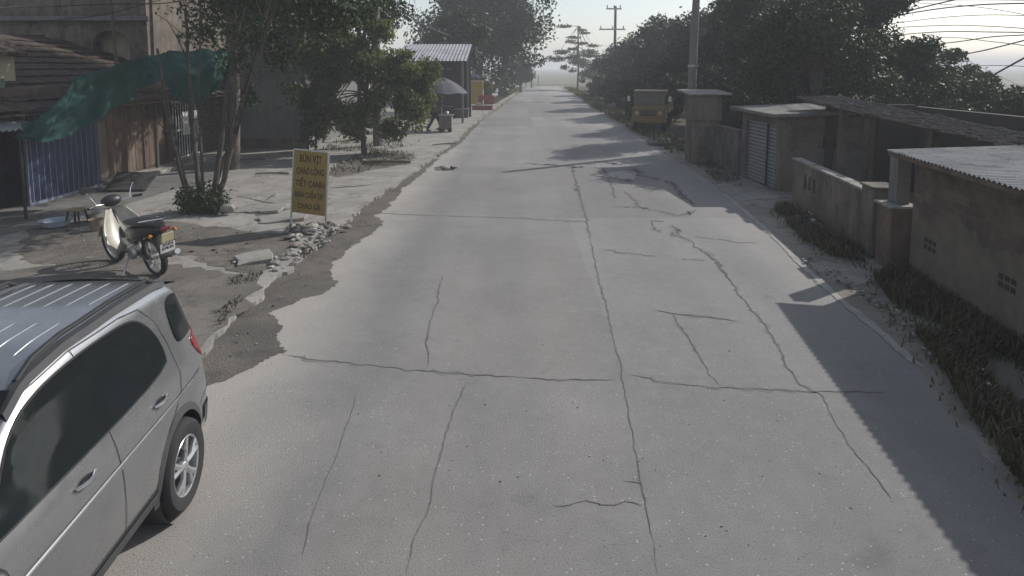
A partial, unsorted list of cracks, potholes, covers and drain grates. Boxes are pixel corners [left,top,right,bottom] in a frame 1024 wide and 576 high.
crack [285,277,613,574]
crack [523,161,893,501]
